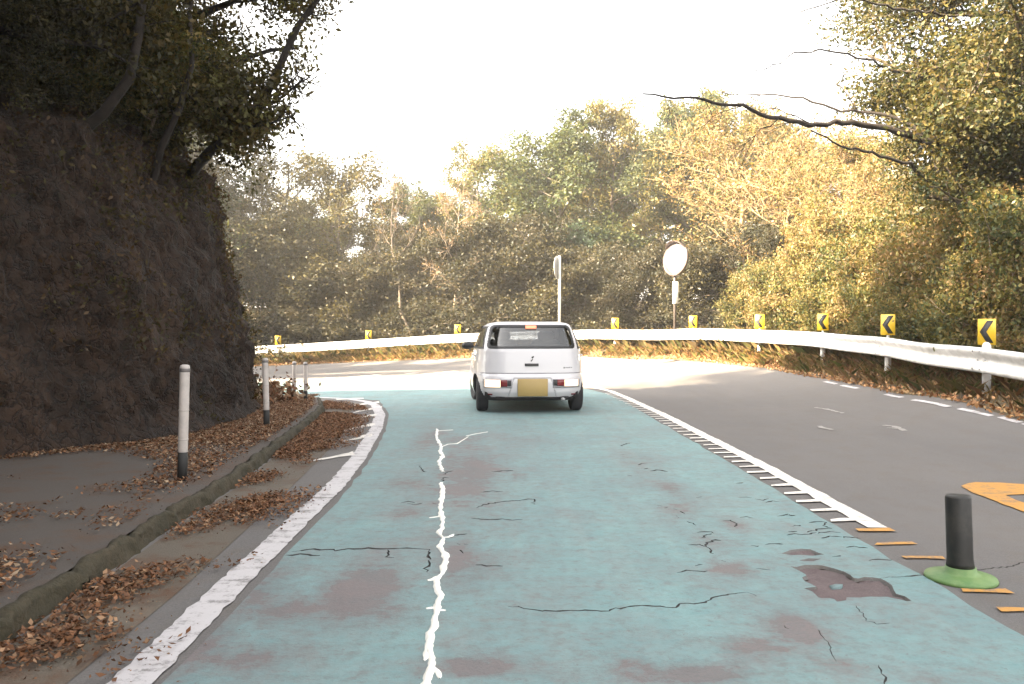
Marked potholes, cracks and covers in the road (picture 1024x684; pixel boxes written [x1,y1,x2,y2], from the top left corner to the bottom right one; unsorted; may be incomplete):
crack [509,592,756,612]
crack [659,497,1024,578]
pothole [791,565,911,602]
